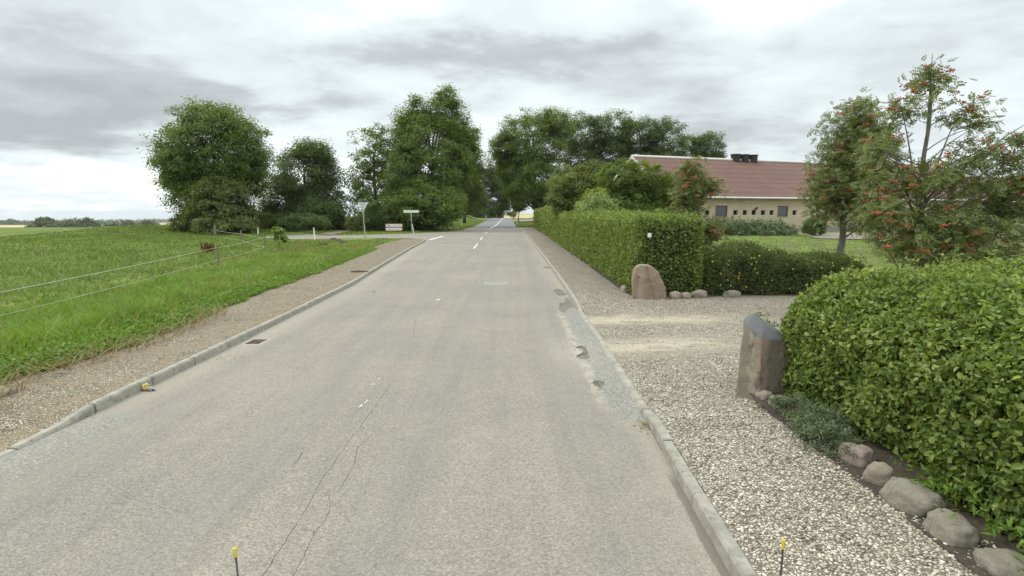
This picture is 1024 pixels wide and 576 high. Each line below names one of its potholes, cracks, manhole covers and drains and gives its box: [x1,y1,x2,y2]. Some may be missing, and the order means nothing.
pothole [551,295,578,317]
crack [262,384,391,576]
pothole [563,342,591,361]
